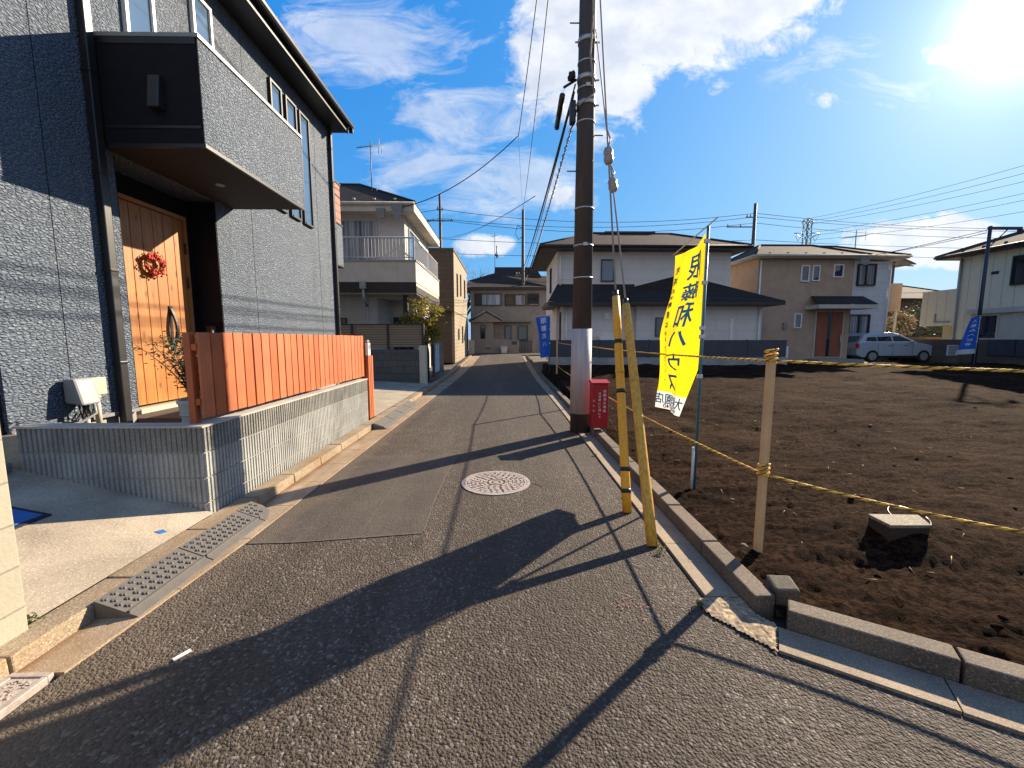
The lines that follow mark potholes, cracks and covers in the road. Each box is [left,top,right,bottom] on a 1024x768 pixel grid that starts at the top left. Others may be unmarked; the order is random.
manhole cover [462,471,530,496]
